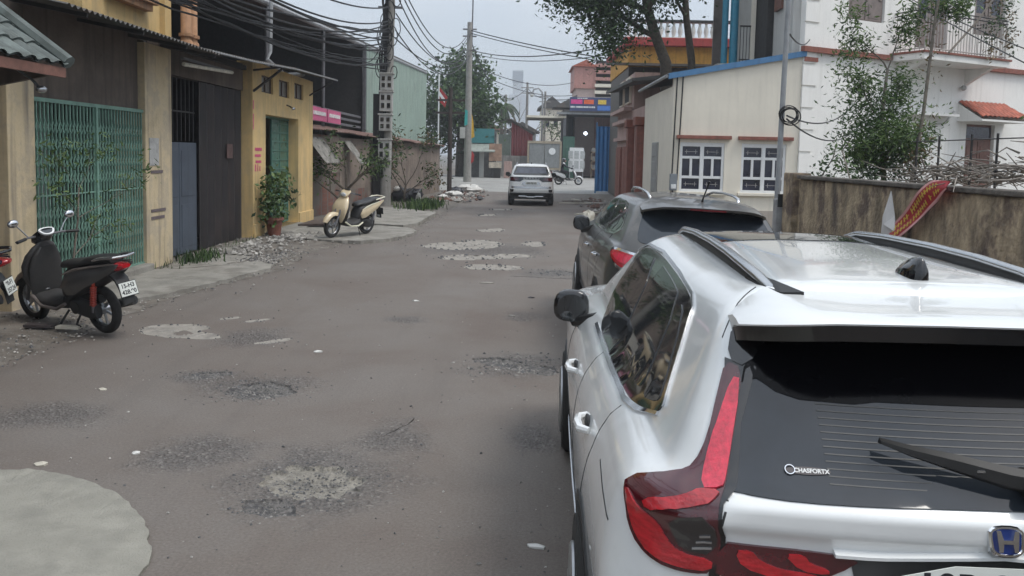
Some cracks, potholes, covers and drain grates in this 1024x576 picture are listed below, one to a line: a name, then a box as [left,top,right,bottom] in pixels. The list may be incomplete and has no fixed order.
pothole [405,236,512,256]
pothole [202,455,414,519]
pothole [523,268,573,278]
pothole [403,252,549,263]
pothole [443,261,523,271]
pothole [413,350,560,387]
pothole [184,372,333,405]
